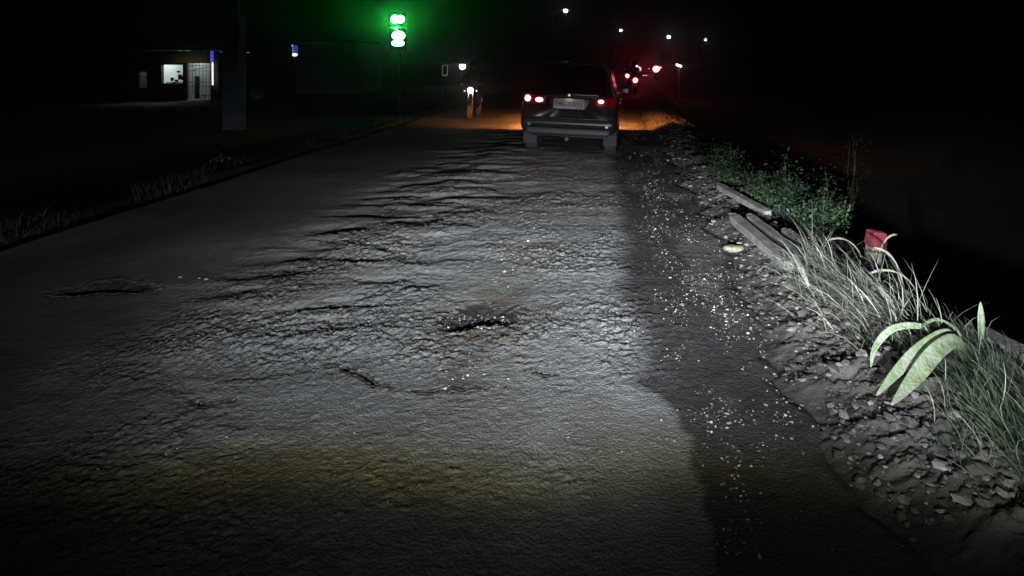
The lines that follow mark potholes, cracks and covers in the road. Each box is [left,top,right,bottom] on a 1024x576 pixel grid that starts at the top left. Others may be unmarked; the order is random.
pothole [45,277,165,298]
crack [184,398,239,408]
pothole [426,299,526,336]
crack [322,365,486,396]
crack [522,367,563,377]
crack [255,240,405,292]
